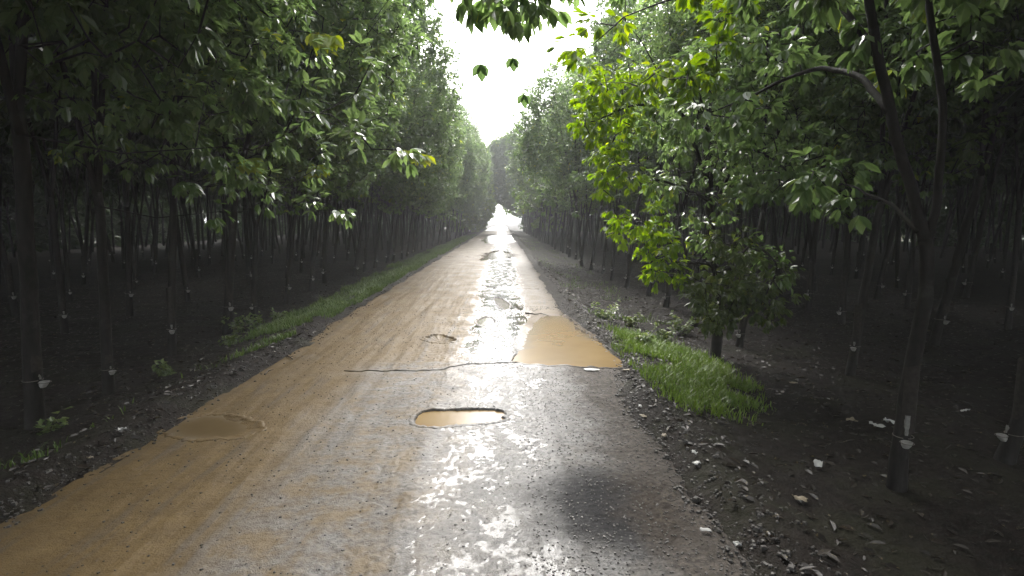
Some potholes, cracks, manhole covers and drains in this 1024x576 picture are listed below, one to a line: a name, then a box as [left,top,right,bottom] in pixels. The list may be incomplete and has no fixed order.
pothole [420,333,459,344]
pothole [408,406,512,429]
pothole [510,311,624,370]
pothole [475,250,521,261]
crack [344,362,516,372]
pothole [474,316,498,327]
pothole [493,297,512,310]
pothole [156,413,267,442]
